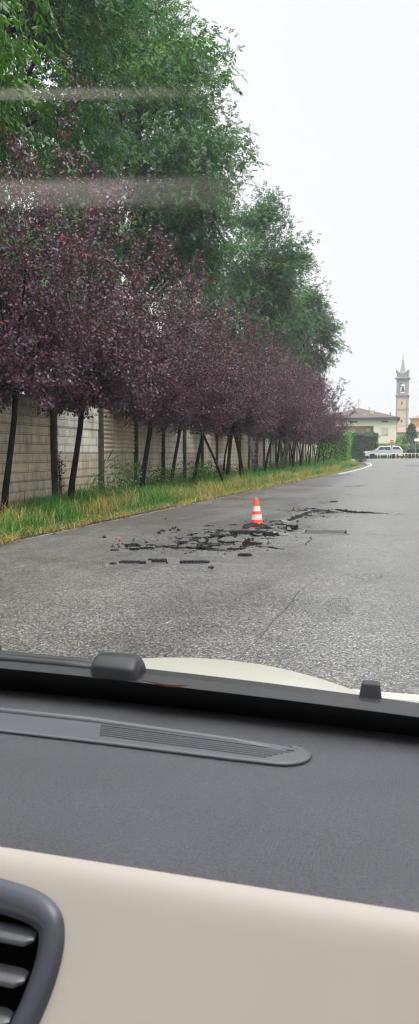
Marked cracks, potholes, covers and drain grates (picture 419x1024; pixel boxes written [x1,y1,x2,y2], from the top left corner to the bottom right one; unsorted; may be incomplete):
crack [203,508,387,549]
